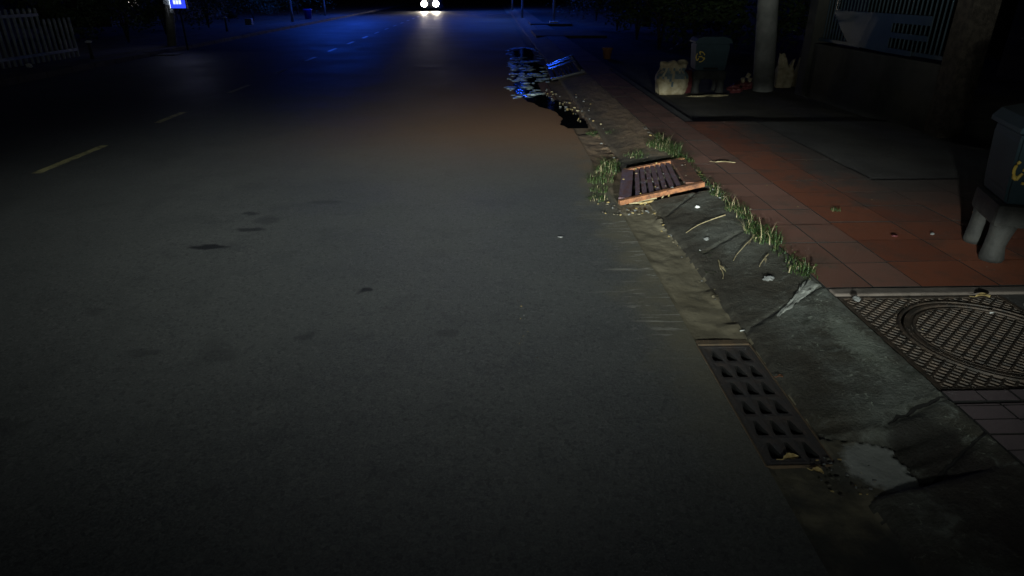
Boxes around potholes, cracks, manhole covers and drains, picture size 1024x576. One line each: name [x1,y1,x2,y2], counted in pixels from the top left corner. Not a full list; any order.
crack [927,433,987,486]
manhole cover [837,295,1024,391]
drain grate [618,157,705,206]
